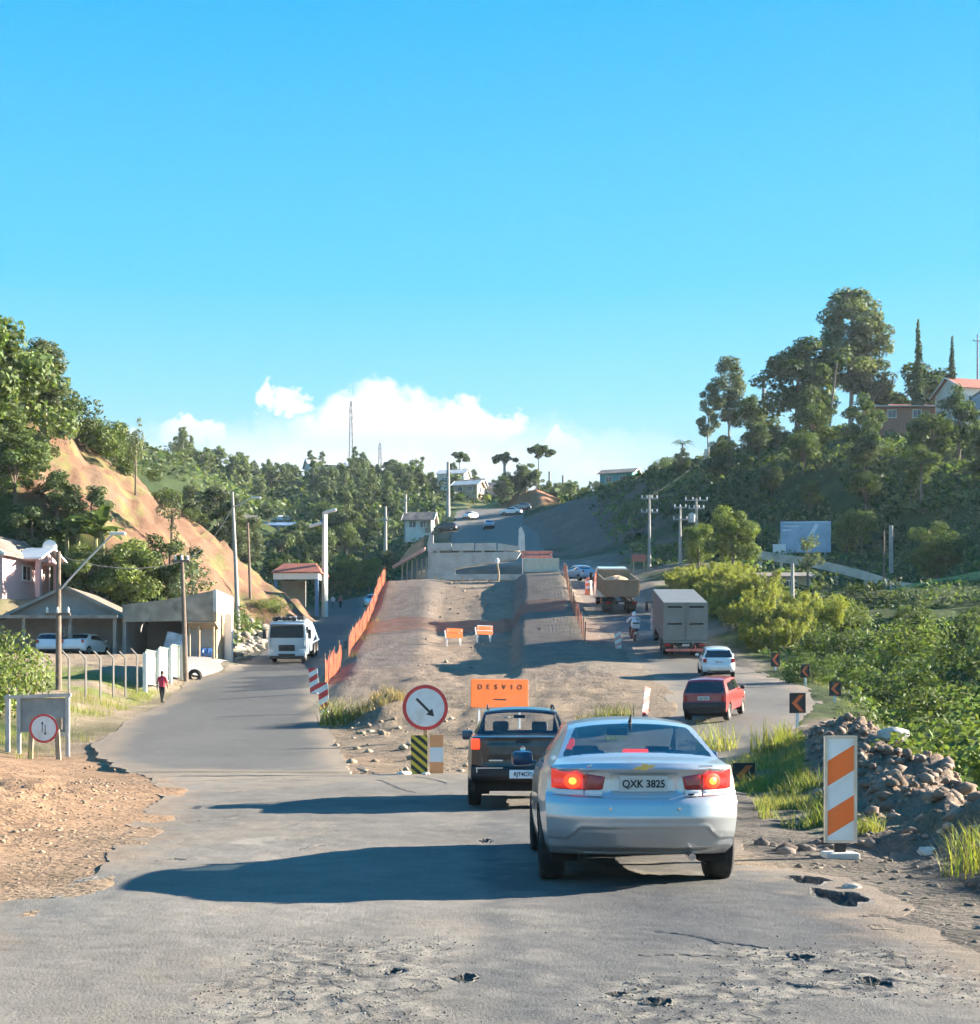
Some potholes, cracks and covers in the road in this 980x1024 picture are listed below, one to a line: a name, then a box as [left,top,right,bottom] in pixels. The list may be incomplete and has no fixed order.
crack [641,930,964,995]
pothole [857,976,896,988]
pothole [449,973,479,983]
pothole [779,875,837,886]
pothole [805,887,875,909]
pothole [638,996,674,1008]
pothole [788,952,818,961]
